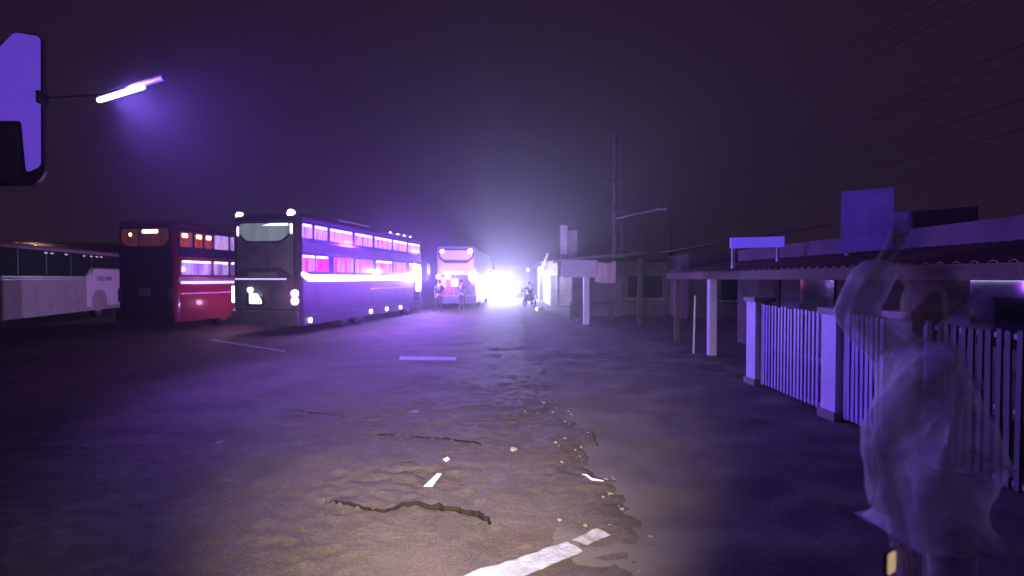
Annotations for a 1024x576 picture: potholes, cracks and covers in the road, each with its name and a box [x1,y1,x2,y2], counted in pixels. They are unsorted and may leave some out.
crack [324,497,491,525]
